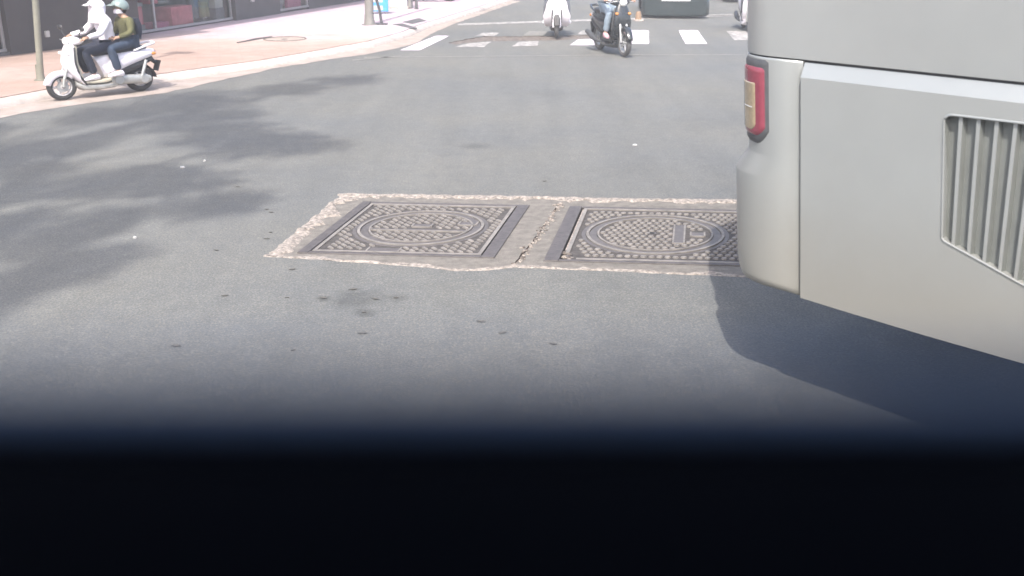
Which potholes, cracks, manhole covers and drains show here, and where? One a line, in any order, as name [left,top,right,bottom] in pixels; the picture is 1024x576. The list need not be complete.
manhole cover [543,206,740,266]
manhole cover [297,201,530,258]
